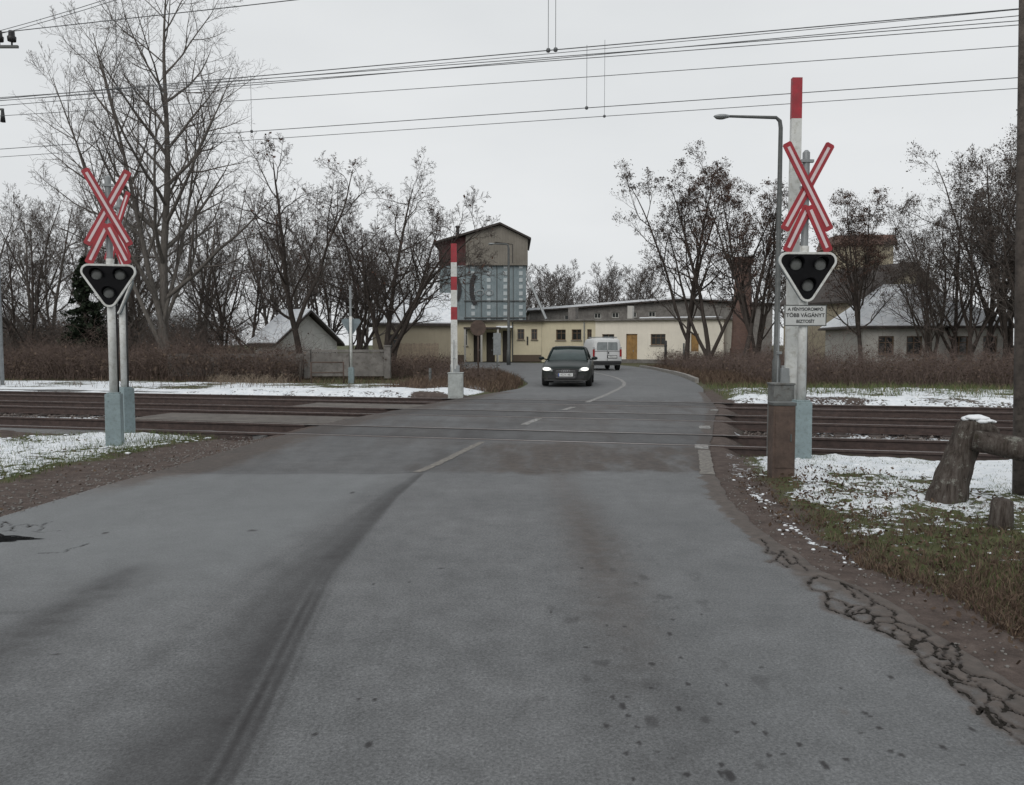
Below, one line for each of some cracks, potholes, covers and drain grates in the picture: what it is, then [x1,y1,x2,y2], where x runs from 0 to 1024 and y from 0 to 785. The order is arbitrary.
crack [761,539,806,568]
pothole [0,533,44,542]
